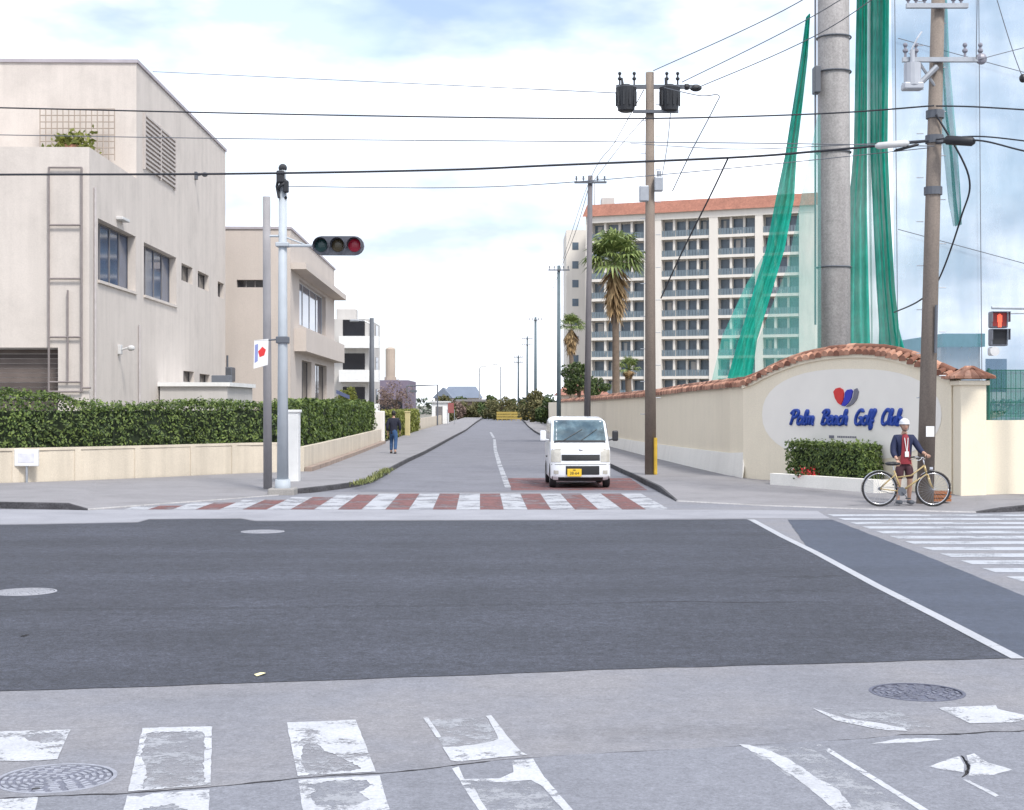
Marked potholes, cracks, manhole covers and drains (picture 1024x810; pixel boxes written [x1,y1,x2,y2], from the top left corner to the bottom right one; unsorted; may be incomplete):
manhole cover [0,763,118,794]
manhole cover [0,588,57,596]
manhole cover [869,683,966,702]
